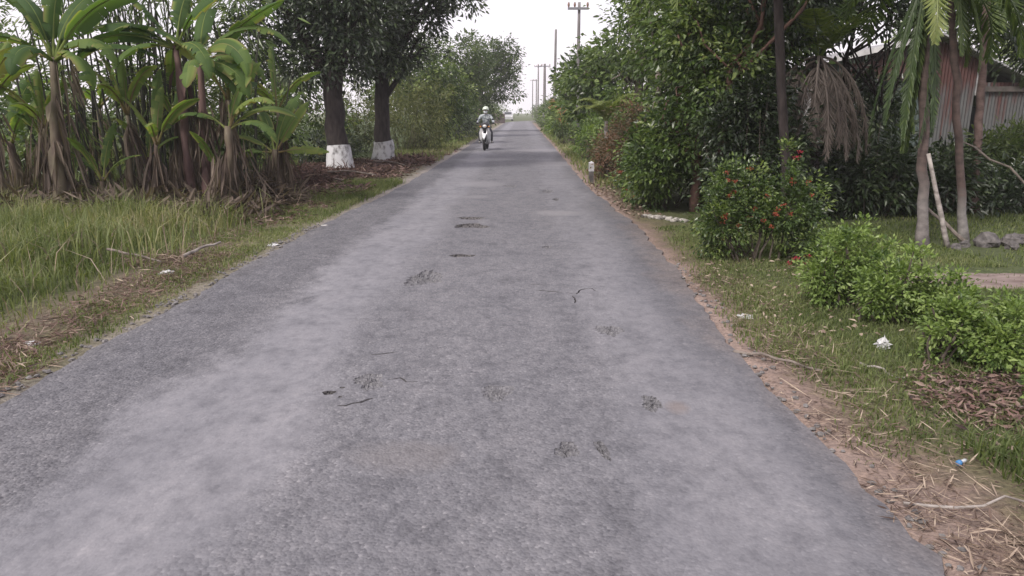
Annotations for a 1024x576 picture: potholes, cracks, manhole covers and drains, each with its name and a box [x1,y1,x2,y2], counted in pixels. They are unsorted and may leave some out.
pothole [641,395,663,413]
pothole [404,270,443,286]
crack [532,284,595,303]
pothole [353,373,384,391]
pothole [594,326,625,337]
pothole [481,385,515,402]
pothole [593,441,611,461]
pothole [554,441,580,458]
